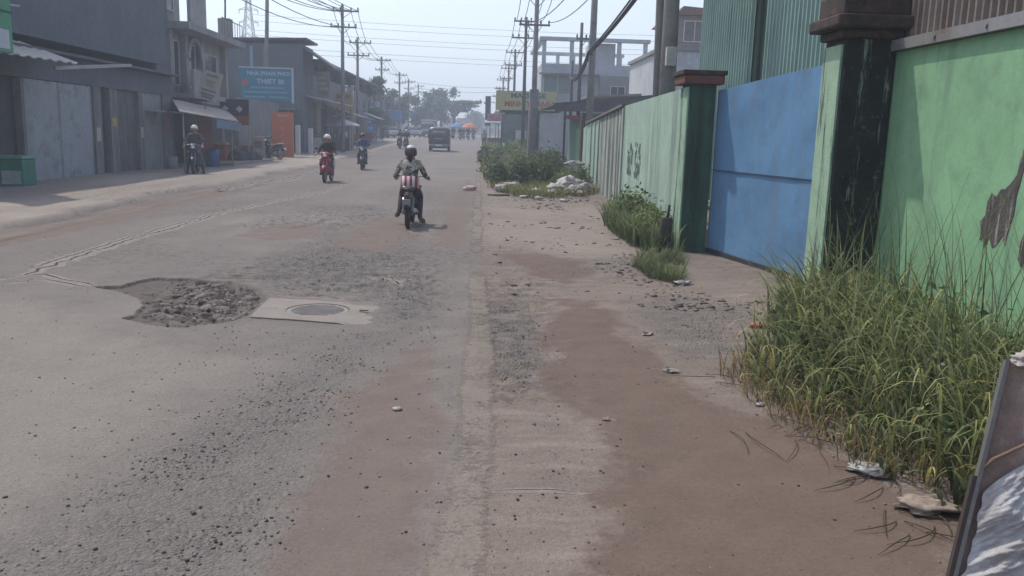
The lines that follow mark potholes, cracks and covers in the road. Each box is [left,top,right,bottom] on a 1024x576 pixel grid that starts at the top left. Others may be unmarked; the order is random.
crack [0,273,95,288]
pothole [83,277,277,332]
manhole cover [250,298,380,325]
